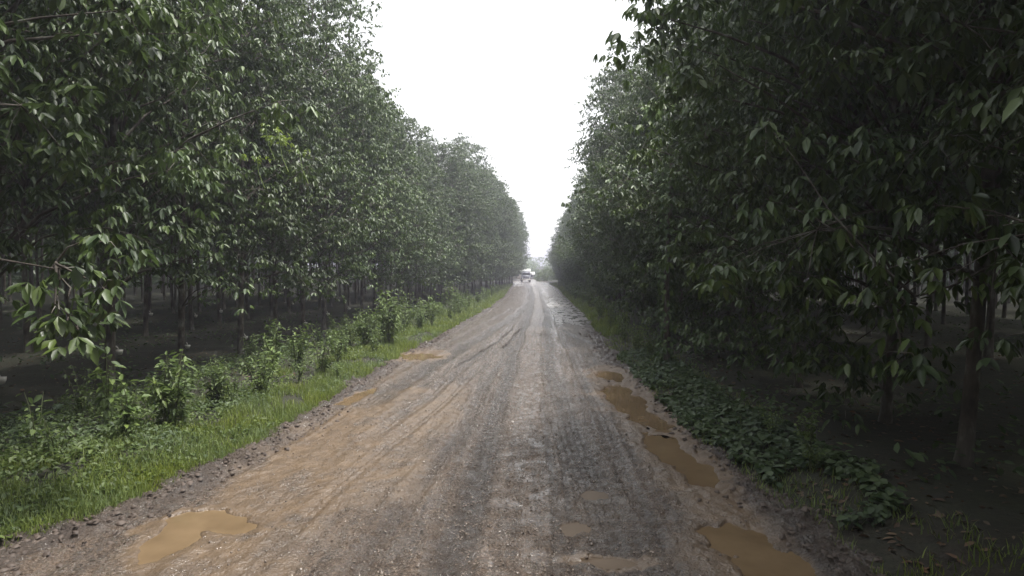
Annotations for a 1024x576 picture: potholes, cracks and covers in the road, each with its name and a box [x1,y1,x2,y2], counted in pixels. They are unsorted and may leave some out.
pothole [580,489,612,501]
pothole [594,367,627,384]
pothole [330,386,381,410]
pothole [559,519,593,537]
